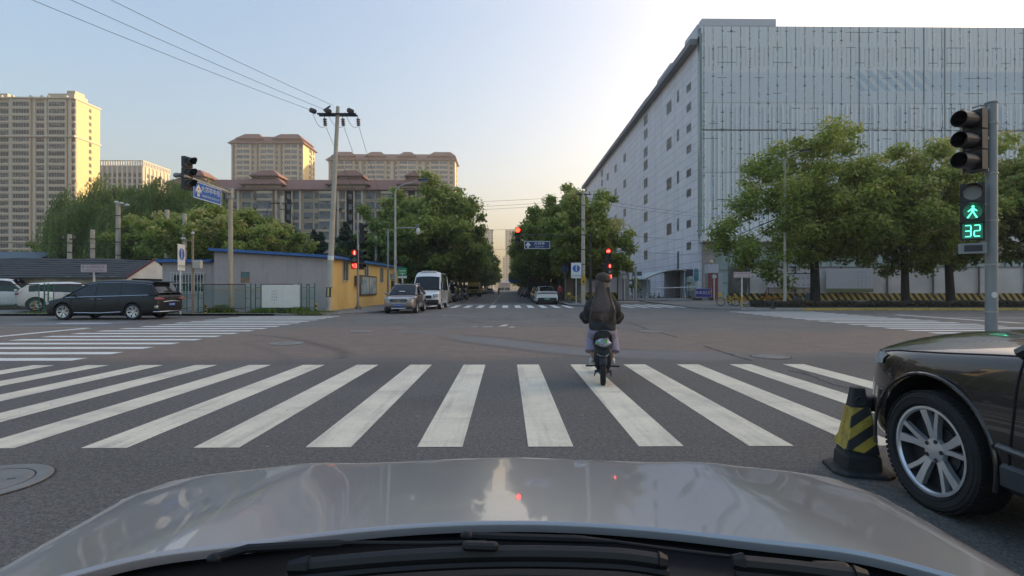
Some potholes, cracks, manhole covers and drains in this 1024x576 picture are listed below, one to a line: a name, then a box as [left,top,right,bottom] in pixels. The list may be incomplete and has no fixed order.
crack [705,346,752,361]
manhole cover [0,464,57,495]
